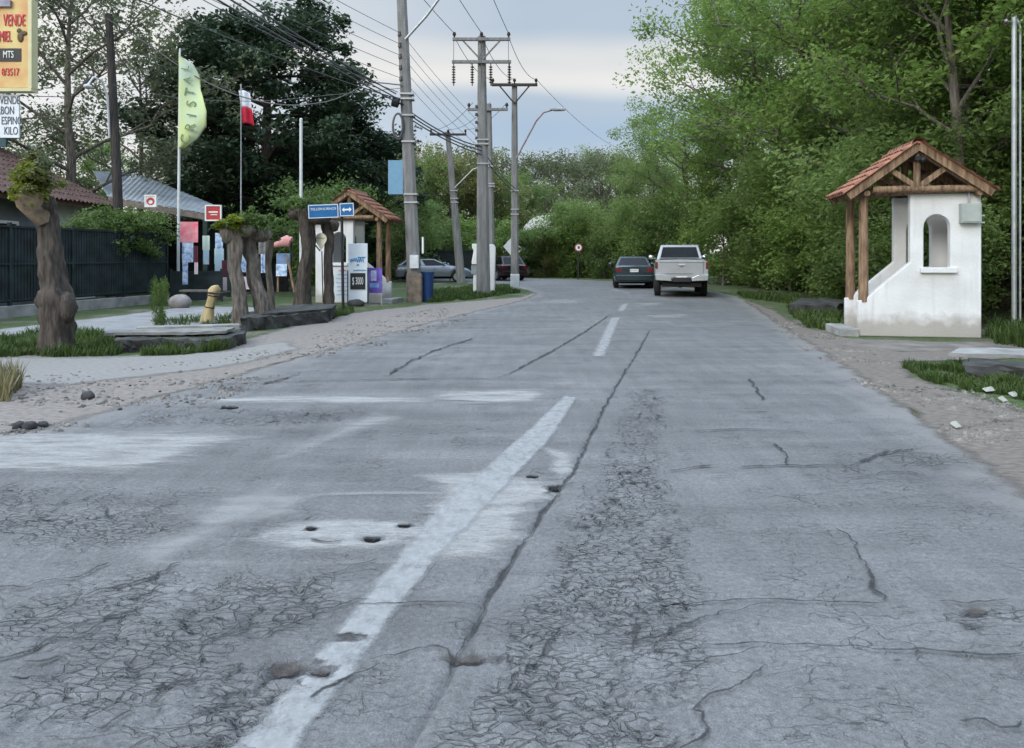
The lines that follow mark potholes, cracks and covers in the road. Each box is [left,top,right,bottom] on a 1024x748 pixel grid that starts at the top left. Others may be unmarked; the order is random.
crack [453,391,1024,748]
crack [0,487,166,552]
pothole [273,664,300,678]
pothole [451,655,483,666]
crack [0,558,476,747]
